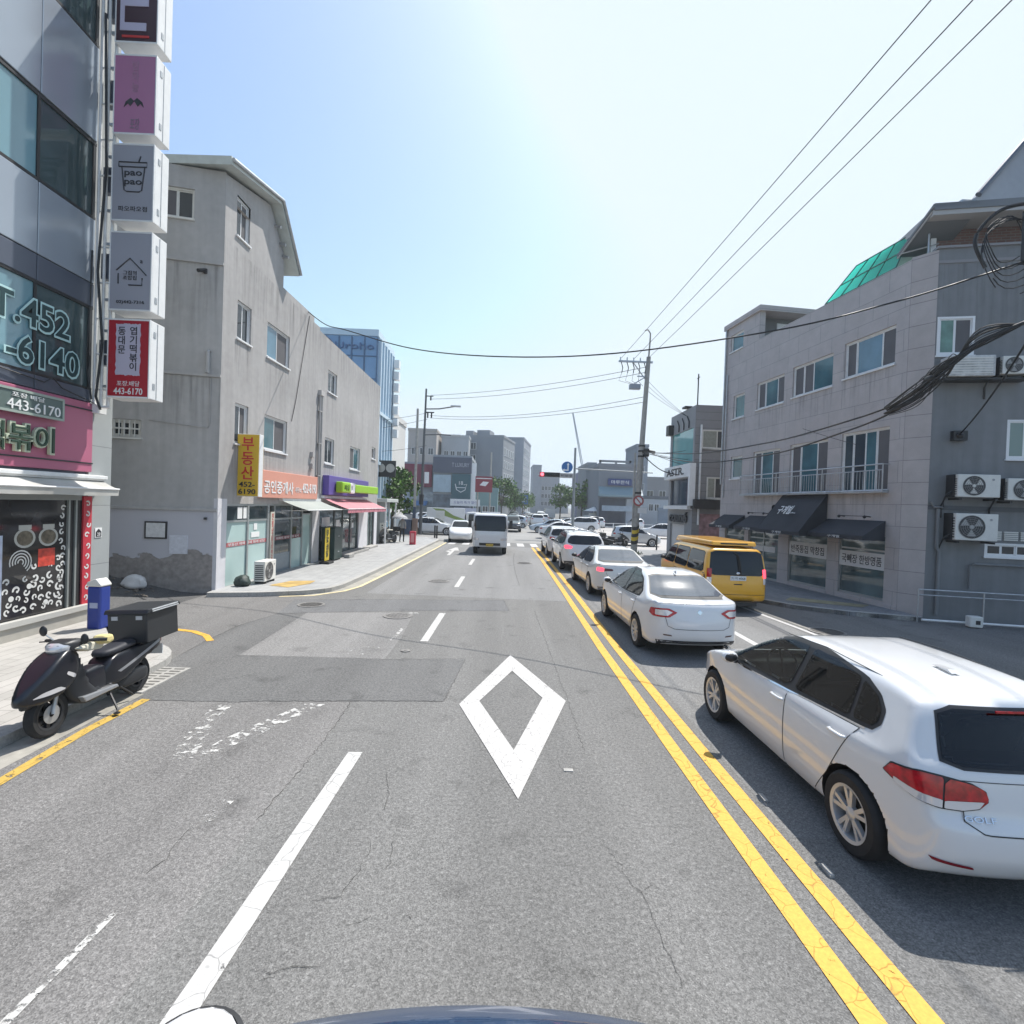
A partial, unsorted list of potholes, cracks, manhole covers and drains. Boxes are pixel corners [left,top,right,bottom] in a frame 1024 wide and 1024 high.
crack [312,778,444,950]
drain grate [116,667,190,694]
crack [606,847,682,983]
